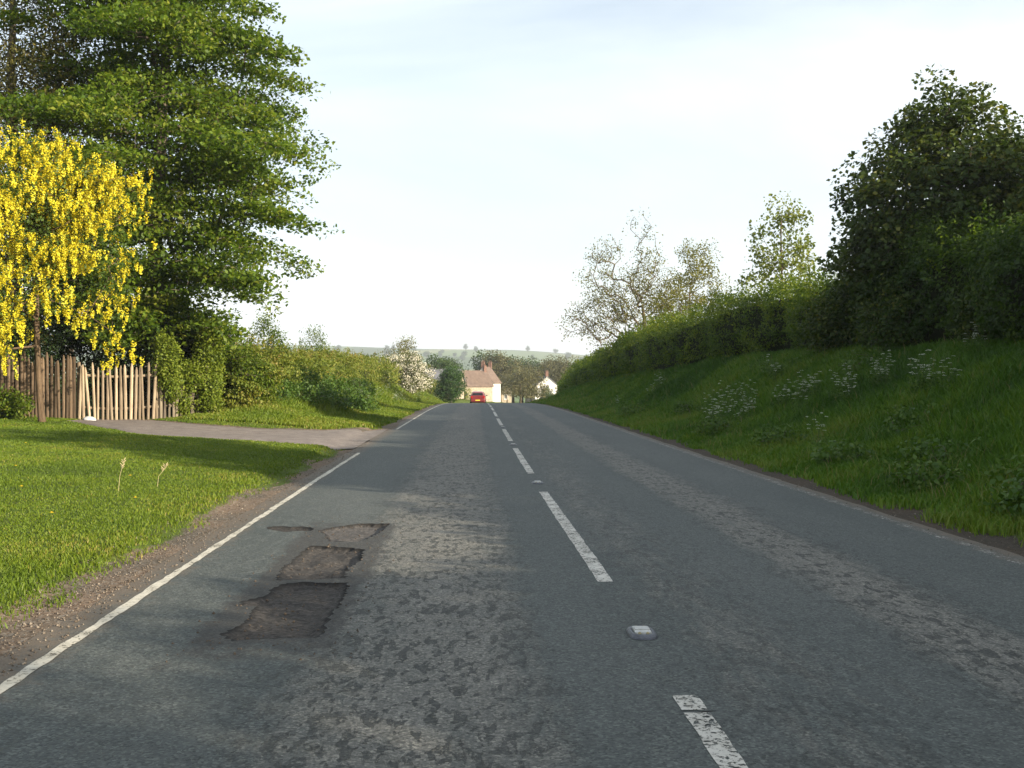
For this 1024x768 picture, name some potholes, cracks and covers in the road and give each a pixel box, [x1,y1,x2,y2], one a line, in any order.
pothole [219,582,350,641]
pothole [318,523,389,542]
pothole [274,546,365,581]
